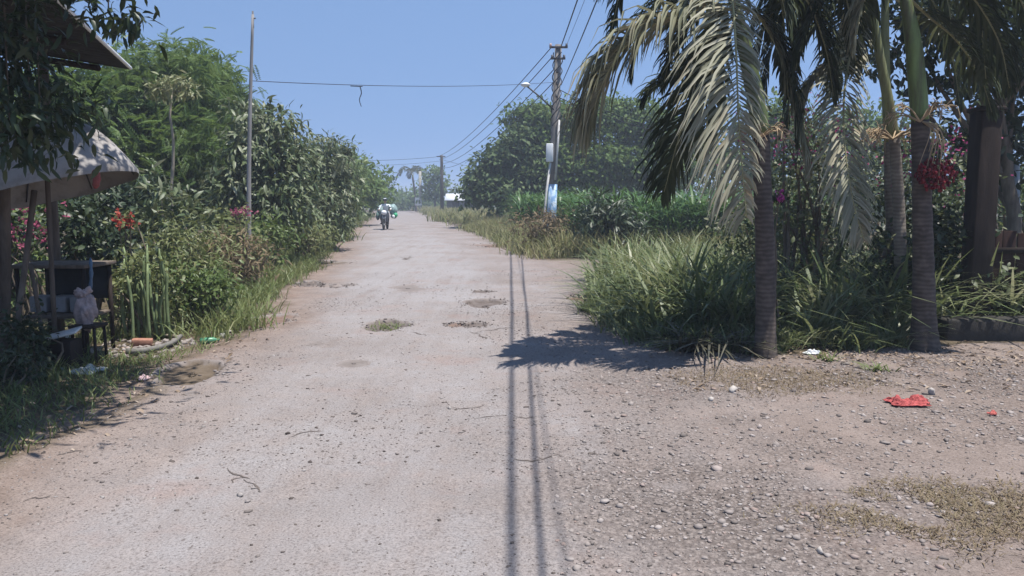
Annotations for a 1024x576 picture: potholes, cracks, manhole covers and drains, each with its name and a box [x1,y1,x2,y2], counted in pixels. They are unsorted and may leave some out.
pothole [462,298,509,308]
pothole [151,359,225,386]
pothole [361,318,415,332]
pothole [336,360,370,368]
